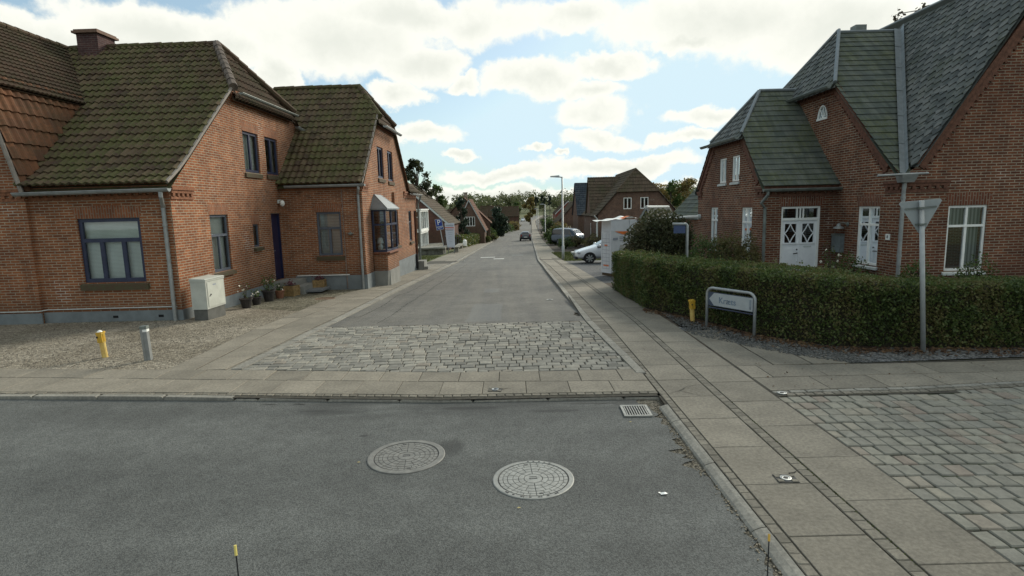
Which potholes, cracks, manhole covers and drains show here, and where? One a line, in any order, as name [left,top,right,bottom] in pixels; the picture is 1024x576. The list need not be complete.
manhole cover [367,440,445,474]
drain grate [620,405,653,417]
manhole cover [493,461,574,500]
